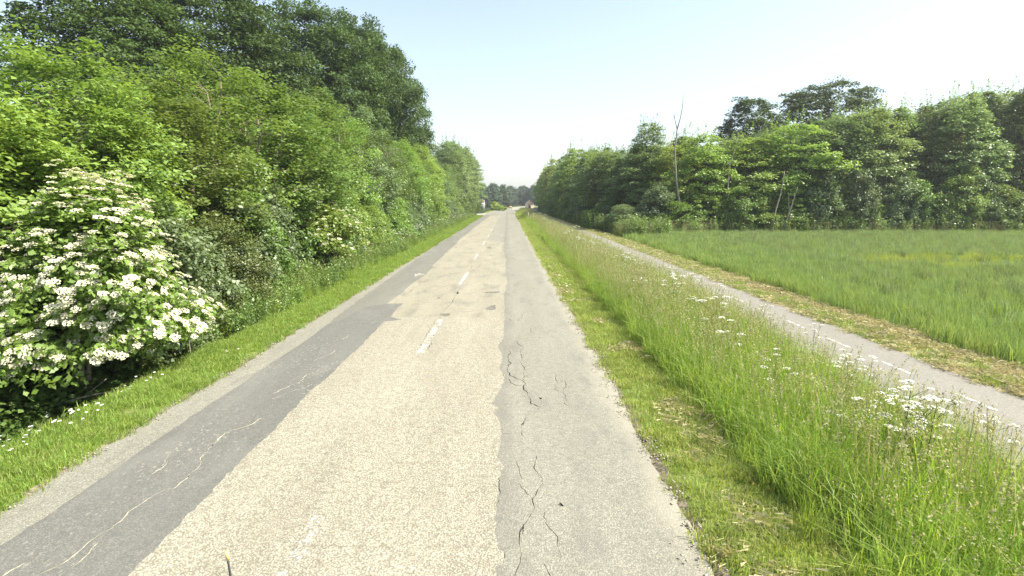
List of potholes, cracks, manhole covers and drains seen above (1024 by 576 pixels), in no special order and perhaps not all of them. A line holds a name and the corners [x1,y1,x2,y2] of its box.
crack [502,315,561,576]
crack [37,335,349,576]
